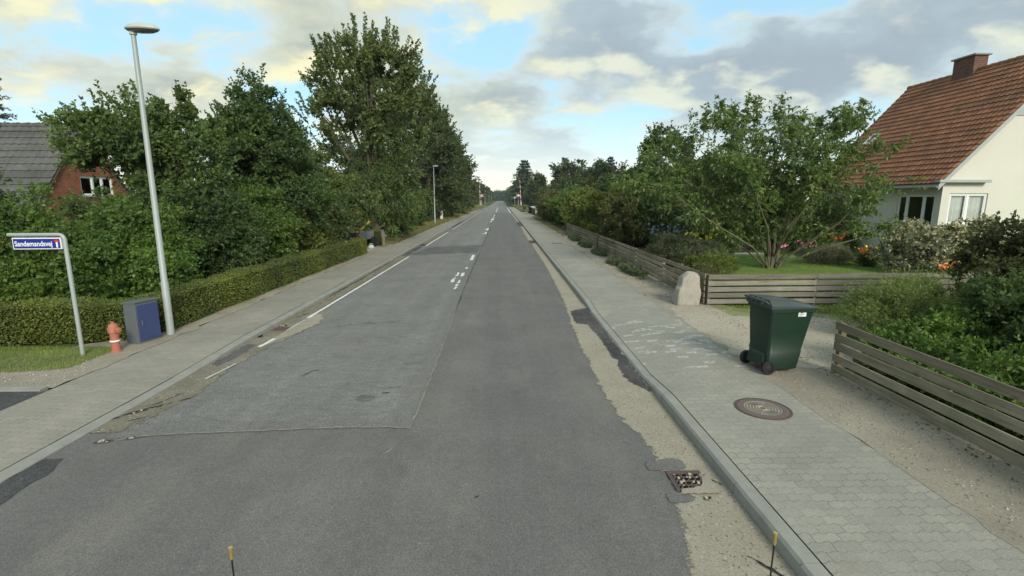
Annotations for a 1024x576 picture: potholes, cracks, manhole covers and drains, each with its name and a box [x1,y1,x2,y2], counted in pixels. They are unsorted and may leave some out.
drain grate [665,470,721,494]
manhole cover [734,398,793,420]
